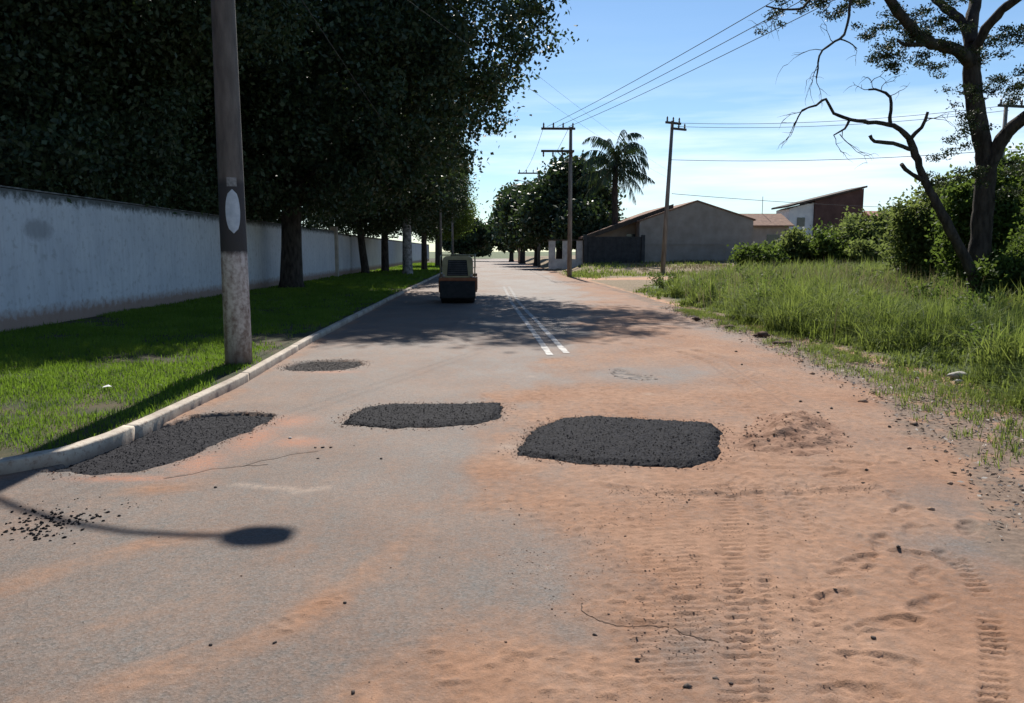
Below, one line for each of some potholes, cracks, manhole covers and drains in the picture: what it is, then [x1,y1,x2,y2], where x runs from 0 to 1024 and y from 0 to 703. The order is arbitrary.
crack [164,451,317,479]
crack [581,603,718,642]
